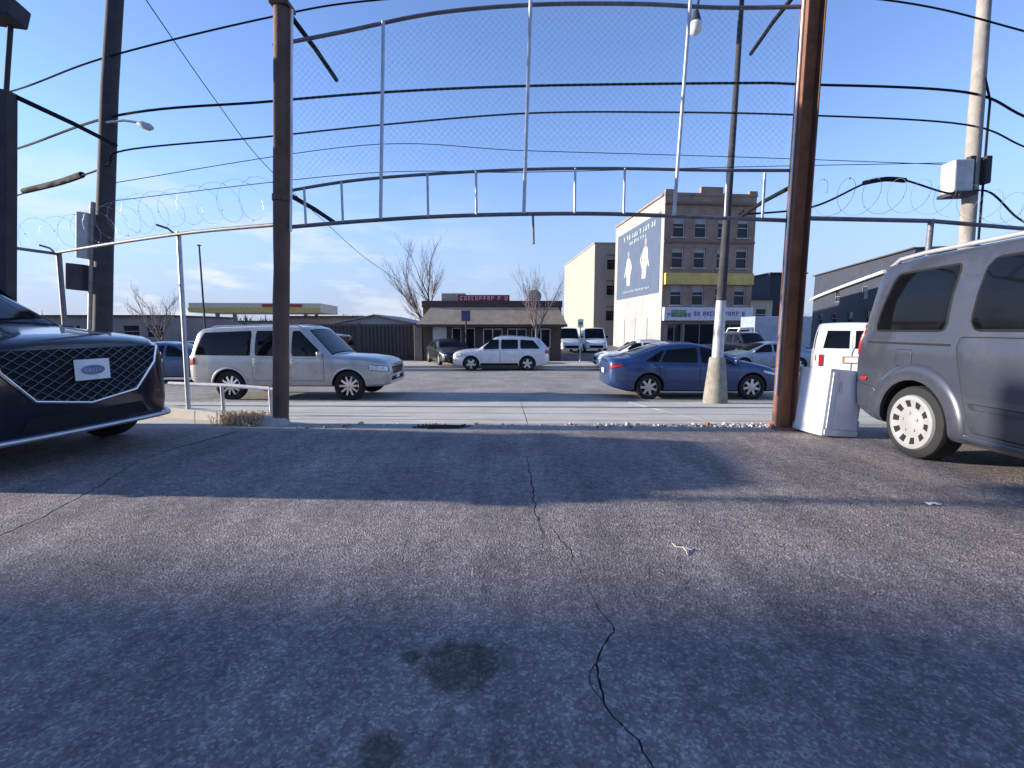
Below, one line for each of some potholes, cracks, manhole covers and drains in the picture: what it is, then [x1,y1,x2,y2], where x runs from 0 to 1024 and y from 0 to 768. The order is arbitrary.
crack [526,455,654,768]
